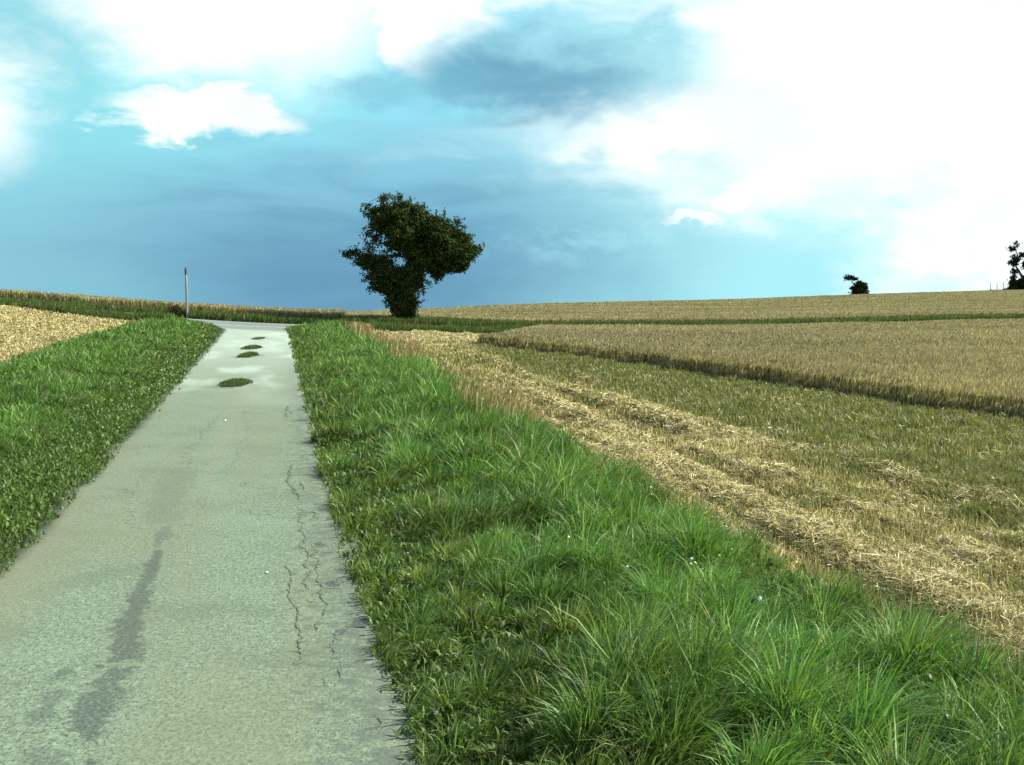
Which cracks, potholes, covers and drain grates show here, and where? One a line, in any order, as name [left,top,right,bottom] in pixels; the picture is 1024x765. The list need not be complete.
crack [277,458,348,687]
